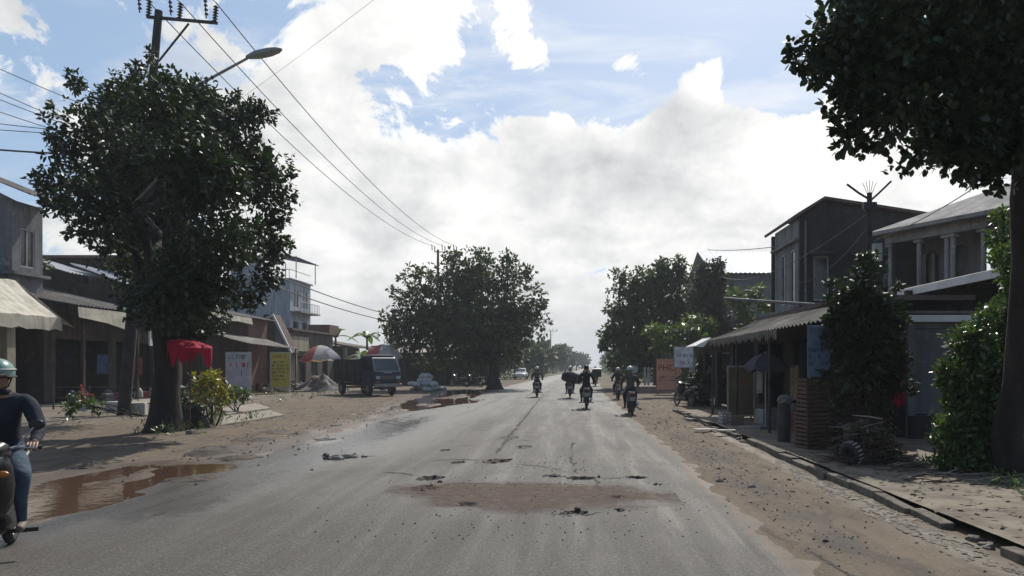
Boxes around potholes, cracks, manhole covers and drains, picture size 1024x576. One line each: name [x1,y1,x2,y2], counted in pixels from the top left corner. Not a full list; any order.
crack [441,442,577,485]
